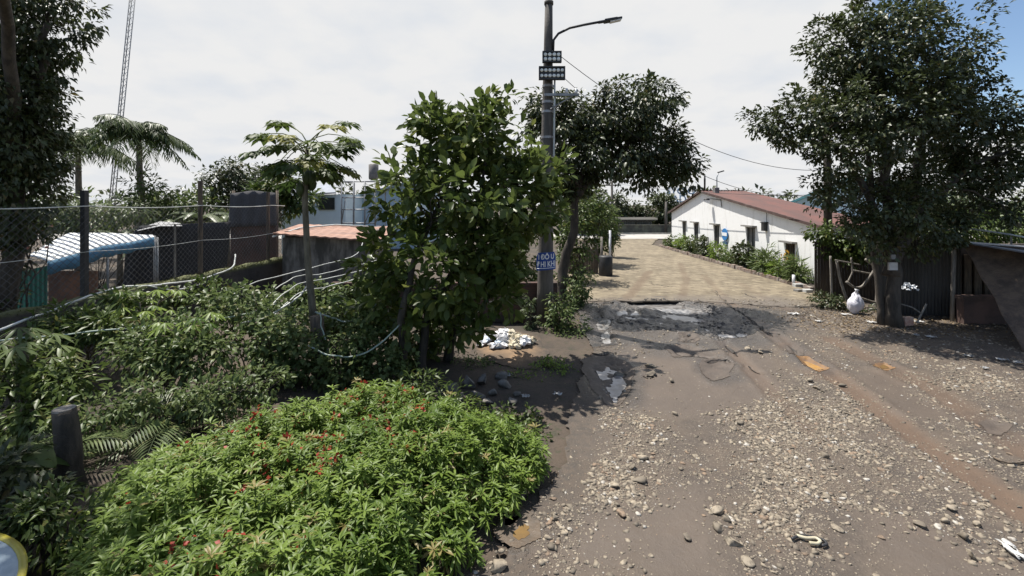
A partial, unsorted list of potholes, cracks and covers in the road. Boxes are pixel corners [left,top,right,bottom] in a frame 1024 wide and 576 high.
crack [677,291,797,374]
pothole [605,301,760,341]
pothole [580,355,635,408]
